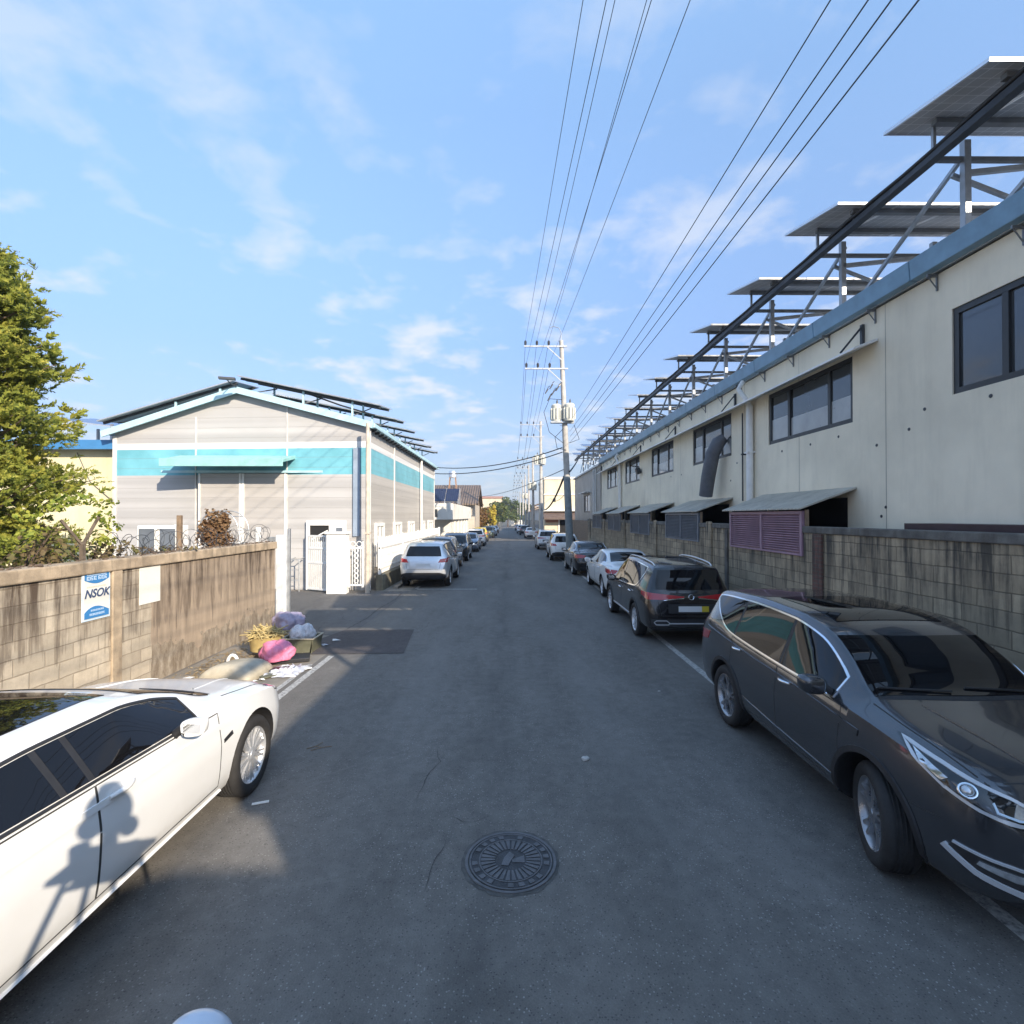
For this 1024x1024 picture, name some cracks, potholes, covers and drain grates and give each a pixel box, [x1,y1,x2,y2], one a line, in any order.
manhole cover [461,830,559,897]
